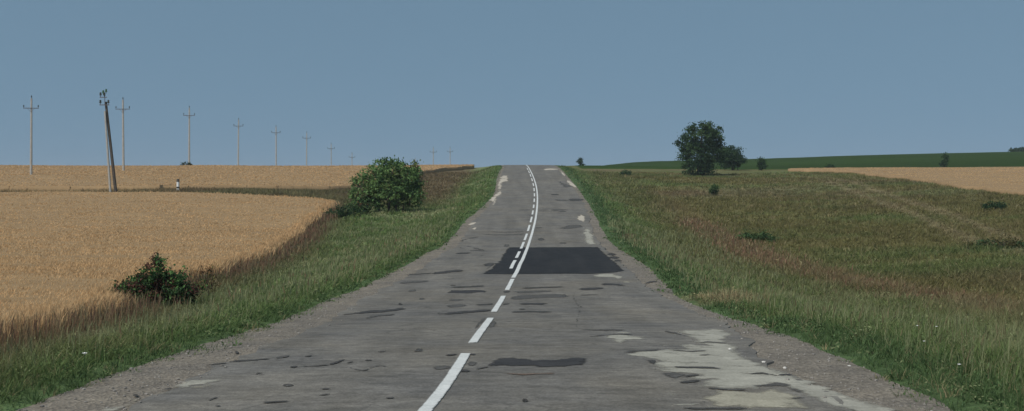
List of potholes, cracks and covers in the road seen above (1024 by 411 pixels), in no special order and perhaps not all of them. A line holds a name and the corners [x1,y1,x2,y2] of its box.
crack [513,283,791,390]
